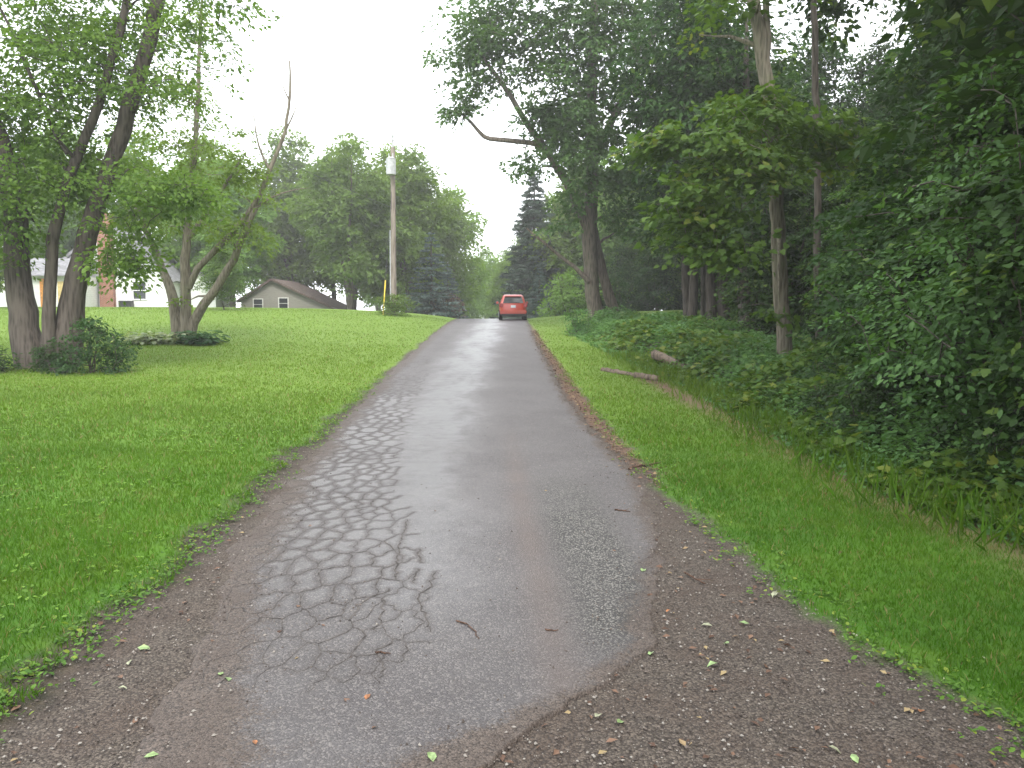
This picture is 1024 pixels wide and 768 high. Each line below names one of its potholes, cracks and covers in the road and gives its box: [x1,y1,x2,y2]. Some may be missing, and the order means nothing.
crack [202,361,436,692]
